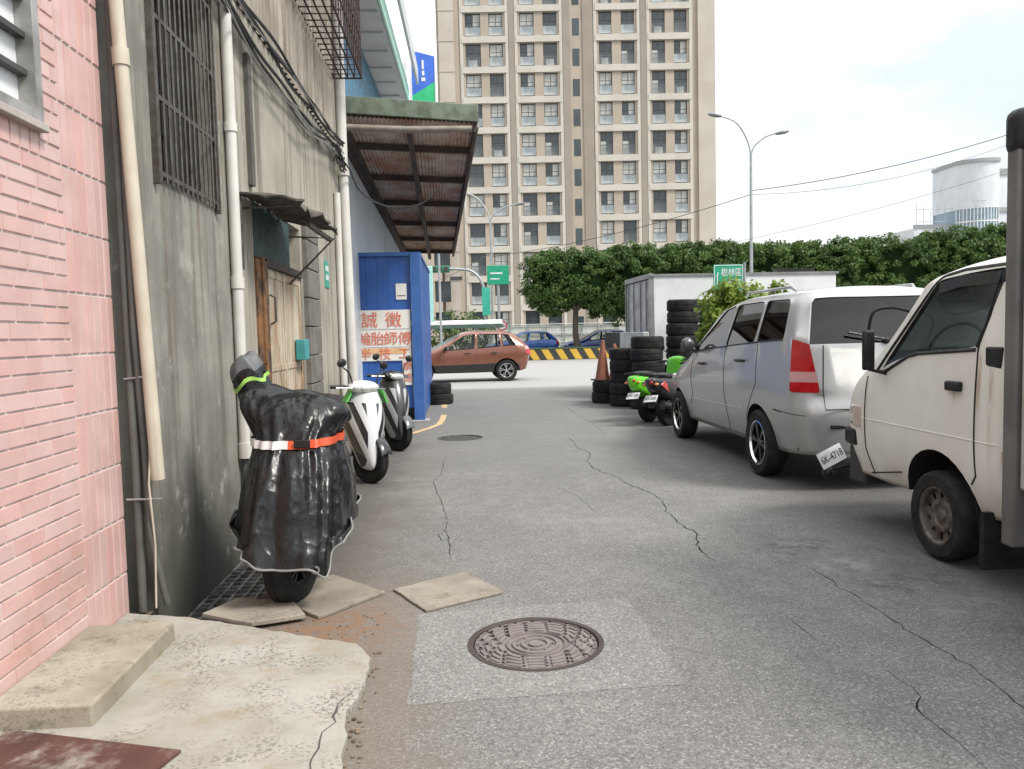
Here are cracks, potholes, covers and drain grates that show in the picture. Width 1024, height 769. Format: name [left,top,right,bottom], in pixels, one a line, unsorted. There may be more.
crack [813,569,1024,708]
crack [309,691,353,769]
manhole cover [468,617,604,672]
crack [885,669,987,769]
crack [373,462,451,559]
drain grate [188,561,266,625]
crack [569,438,713,560]
